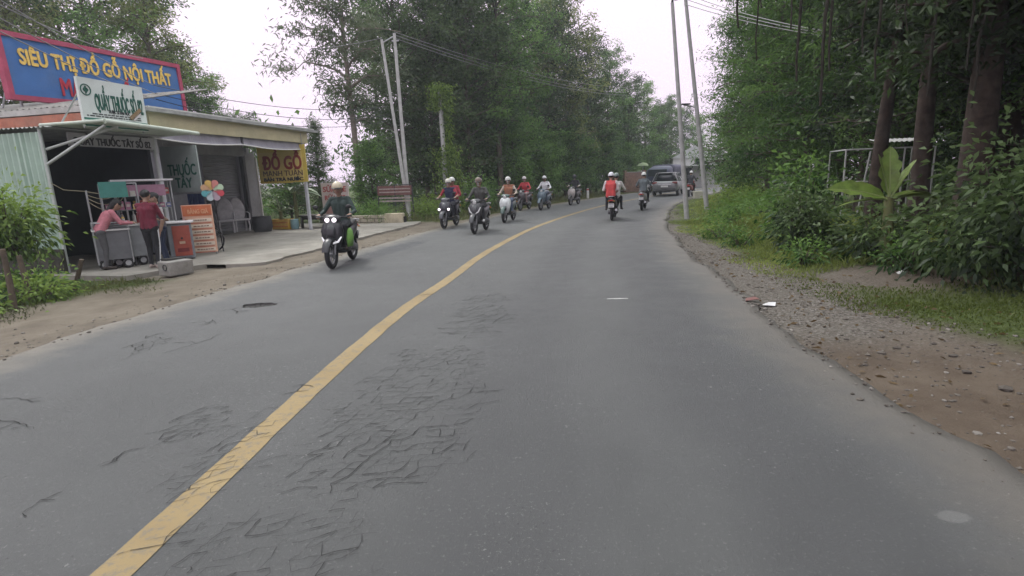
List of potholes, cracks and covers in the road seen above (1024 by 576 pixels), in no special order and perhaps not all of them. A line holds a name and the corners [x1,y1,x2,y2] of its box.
crack [124,308,249,358]
crack [441,293,518,340]
crack [119,346,498,576]
